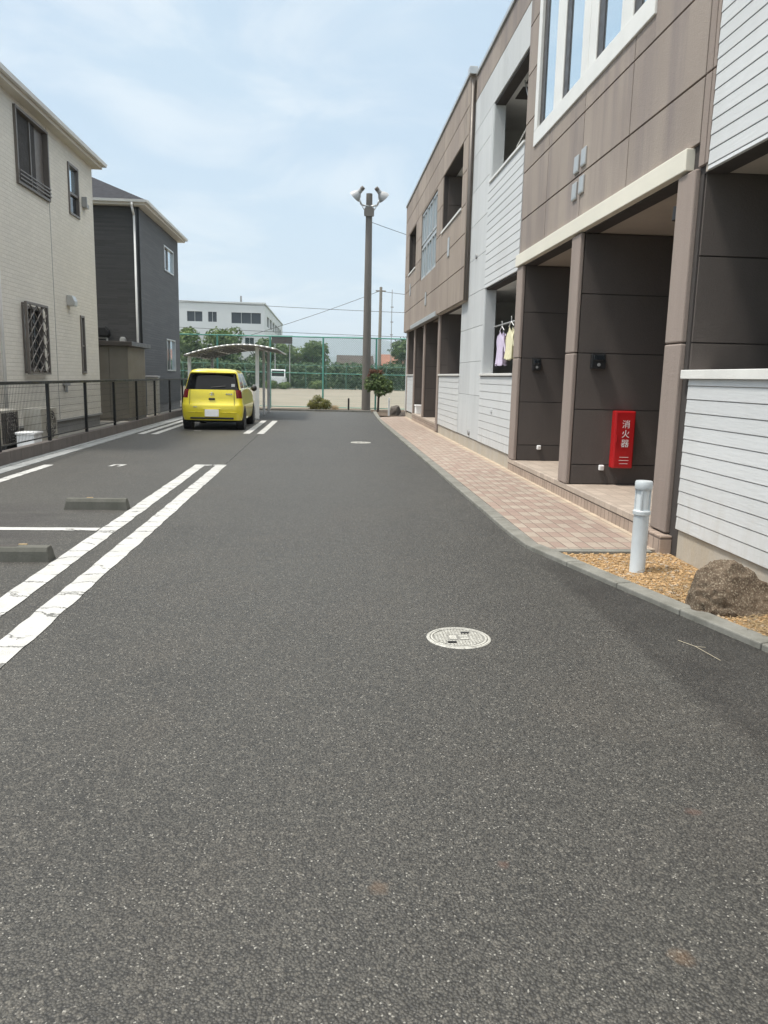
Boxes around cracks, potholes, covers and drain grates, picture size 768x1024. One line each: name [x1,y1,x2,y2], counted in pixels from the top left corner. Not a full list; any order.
manhole cover [426,627,491,649]
